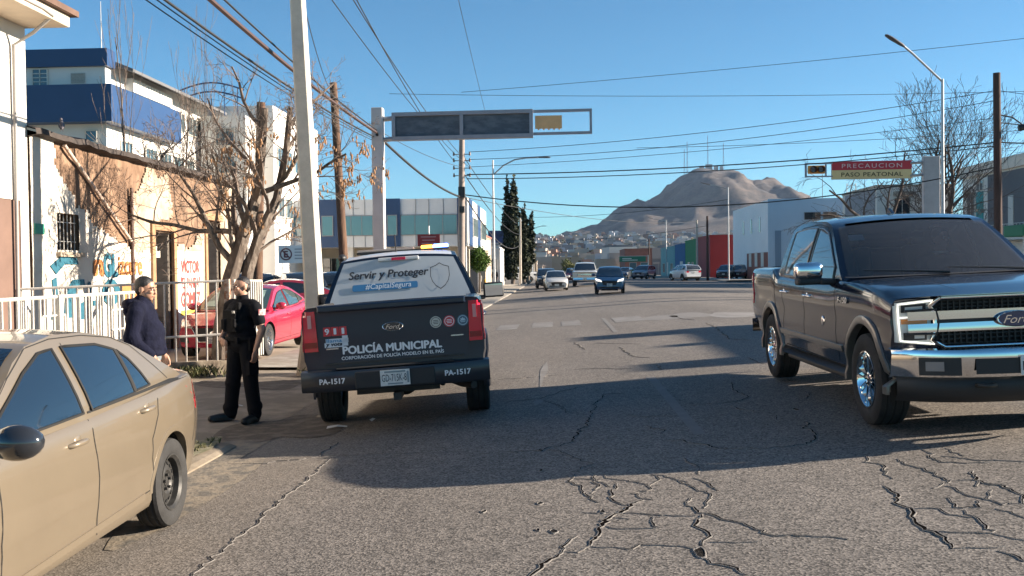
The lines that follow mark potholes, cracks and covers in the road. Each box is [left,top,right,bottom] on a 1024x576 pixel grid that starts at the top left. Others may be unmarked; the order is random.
crack [242,456,318,464]
crack [498,342,848,576]
crack [863,448,1024,562]
